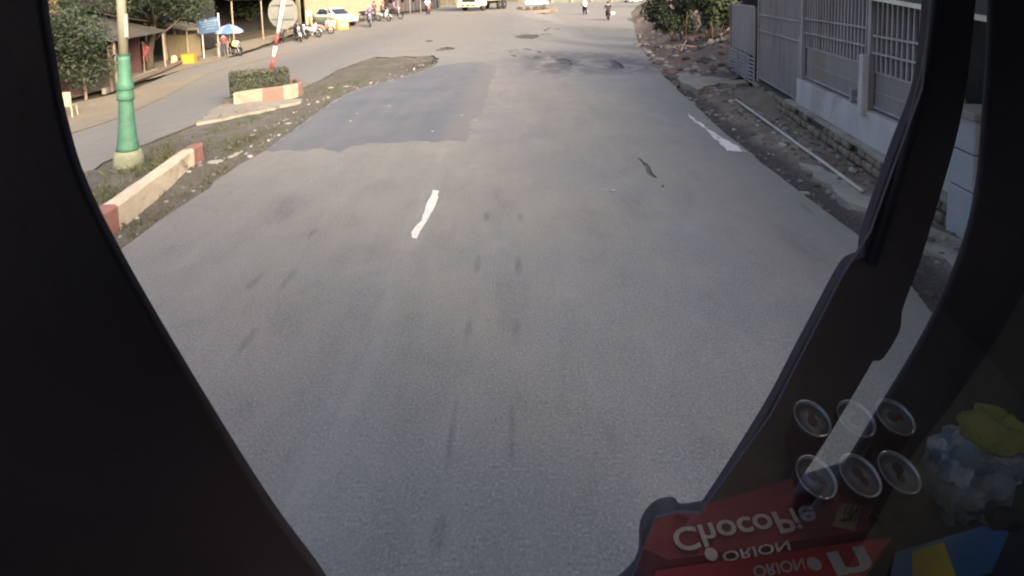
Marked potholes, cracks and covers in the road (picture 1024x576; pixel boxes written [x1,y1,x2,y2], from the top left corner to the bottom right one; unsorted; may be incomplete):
crack [638,158,664,187]
